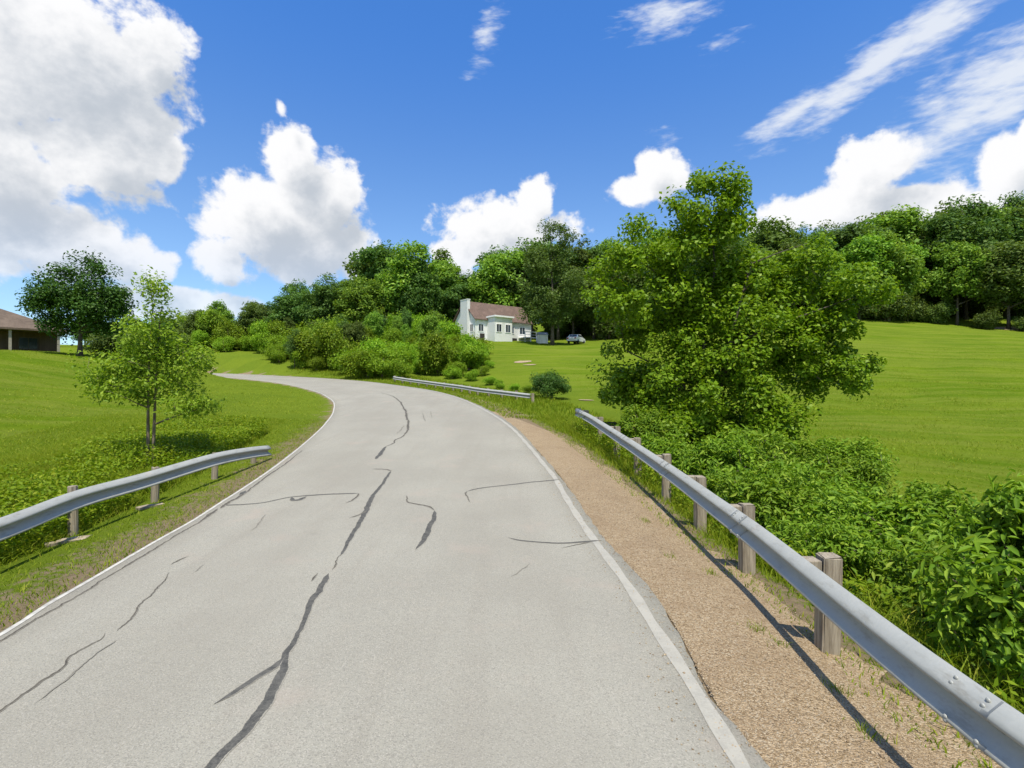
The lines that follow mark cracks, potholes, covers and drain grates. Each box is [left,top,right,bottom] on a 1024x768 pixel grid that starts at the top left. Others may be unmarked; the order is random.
crack [508,537,602,548]
crack [375,393,432,459]
crack [0,451,360,712]
crack [465,479,560,503]
